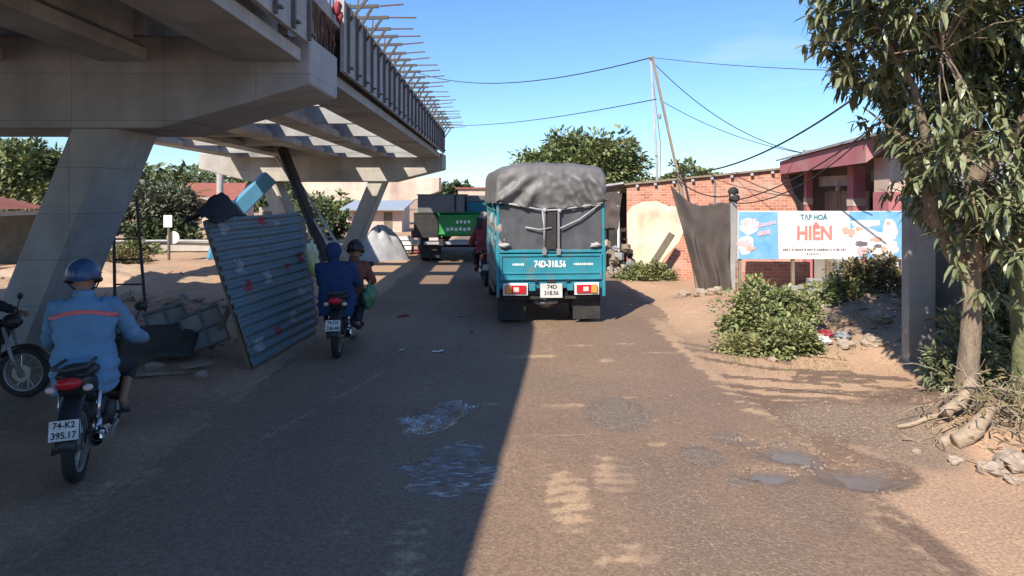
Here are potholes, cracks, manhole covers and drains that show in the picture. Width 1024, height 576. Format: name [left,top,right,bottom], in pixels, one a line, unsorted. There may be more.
pothole [393,400,480,438]
pothole [747,440,827,469]
pothole [394,441,507,498]
pothole [737,467,806,484]
pothole [799,459,914,493]
